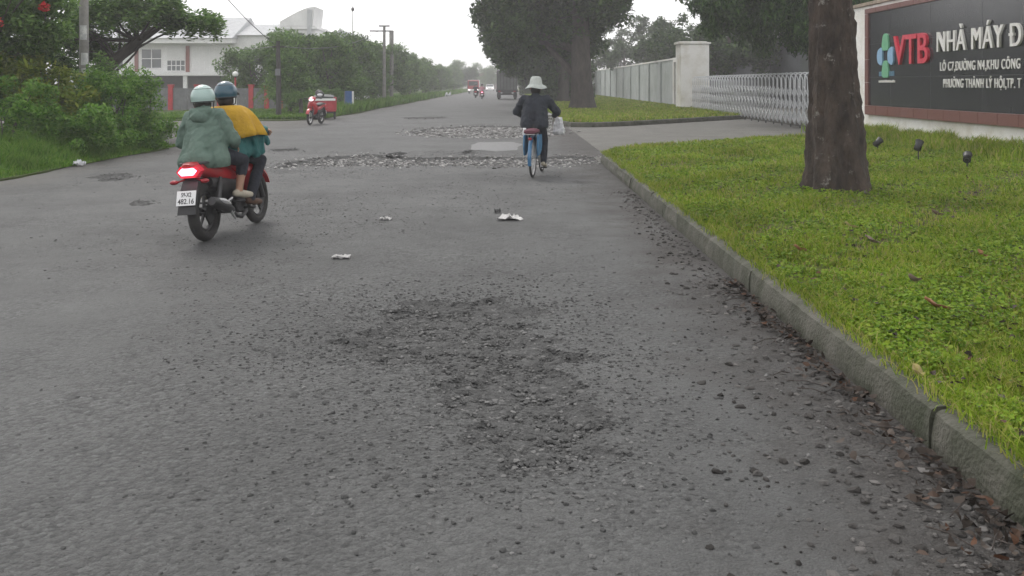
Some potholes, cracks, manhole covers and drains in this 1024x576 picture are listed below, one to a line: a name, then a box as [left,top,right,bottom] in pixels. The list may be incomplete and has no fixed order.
pothole [275,154,601,168]
pothole [324,297,635,477]
pothole [410,126,554,138]
